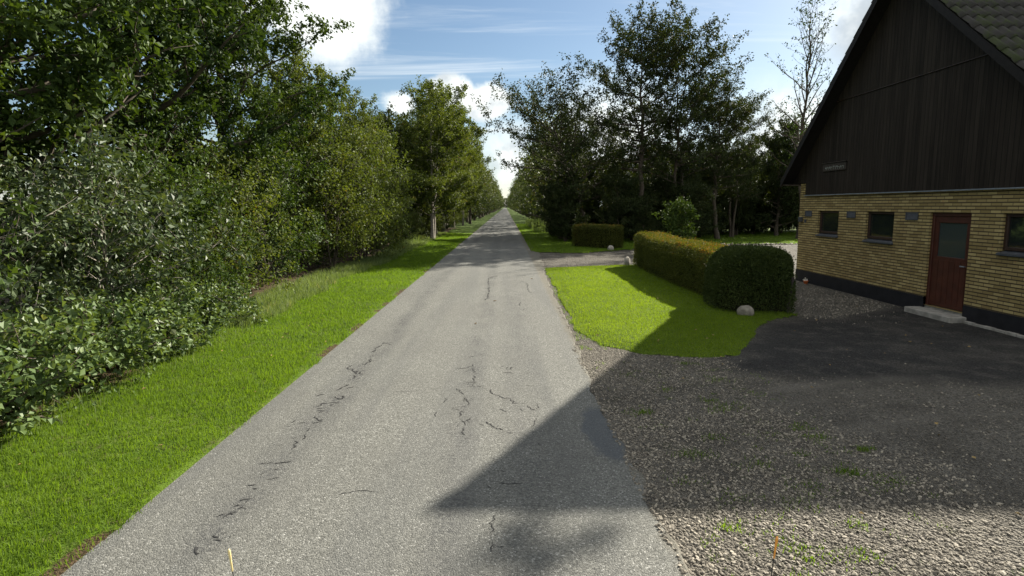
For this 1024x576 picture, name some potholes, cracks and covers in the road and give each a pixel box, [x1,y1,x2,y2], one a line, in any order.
crack [218,342,391,517]
crack [434,356,539,488]
